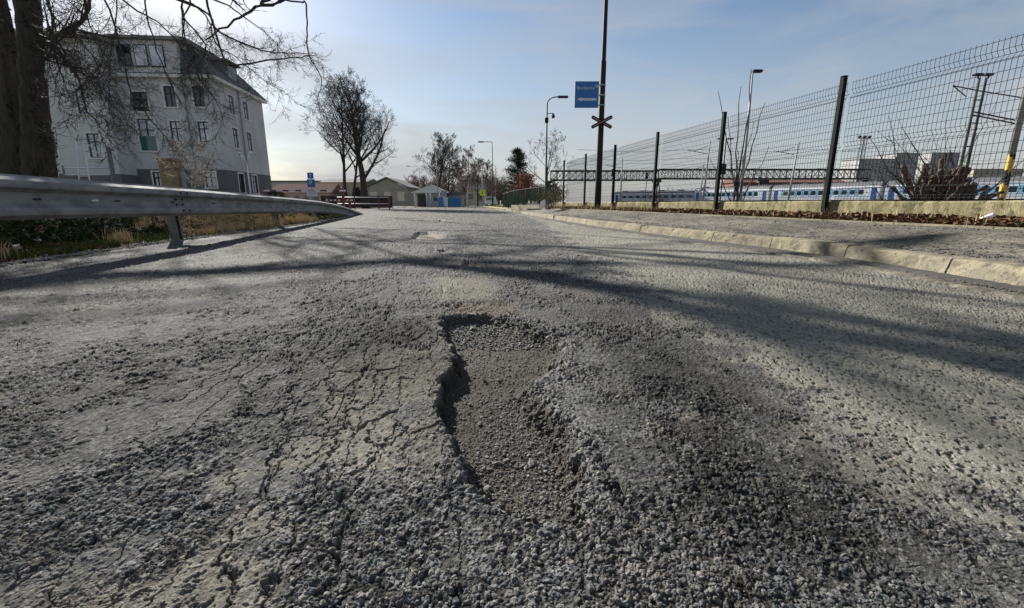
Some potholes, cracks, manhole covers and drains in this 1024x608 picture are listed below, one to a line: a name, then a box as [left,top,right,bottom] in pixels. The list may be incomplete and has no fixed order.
crack [0,211,525,608]
pothole [430,311,606,539]
pothole [410,231,460,240]
